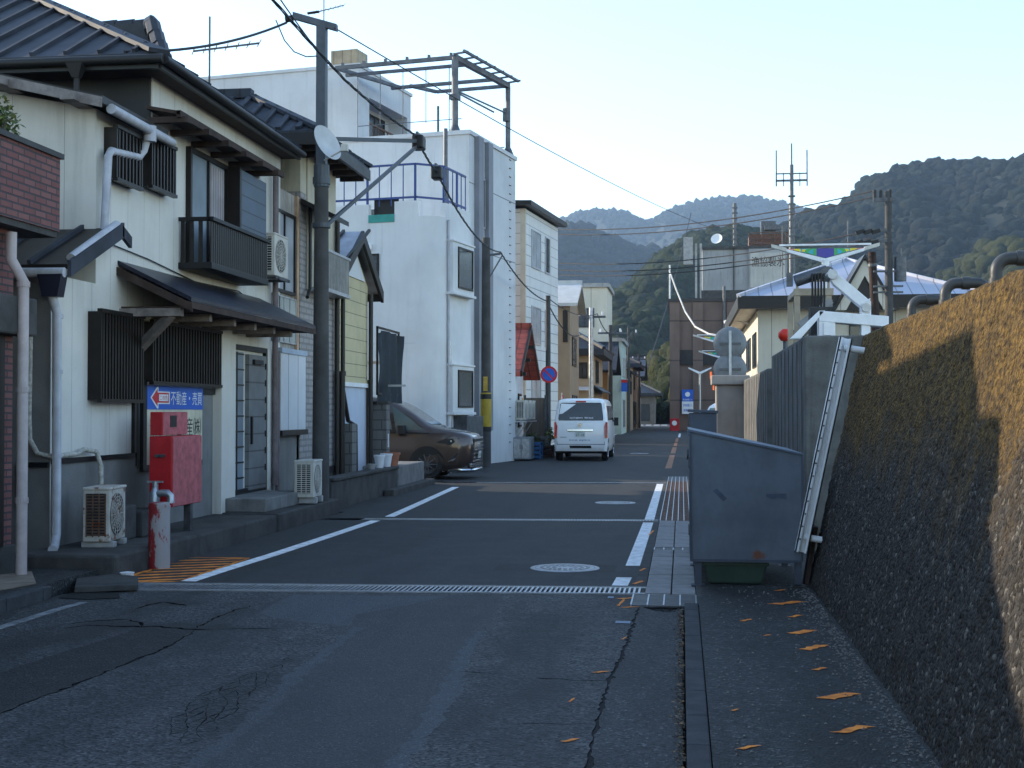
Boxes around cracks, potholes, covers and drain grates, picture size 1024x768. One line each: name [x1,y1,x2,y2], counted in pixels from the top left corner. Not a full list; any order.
drain grate [660,510,689,523]
drain grate [662,501,689,510]
drain grate [664,493,689,501]
crack [0,602,263,714]
crack [523,608,640,768]
manhole cover [530,564,600,572]
drain grate [131,582,647,595]
crack [169,658,292,746]
